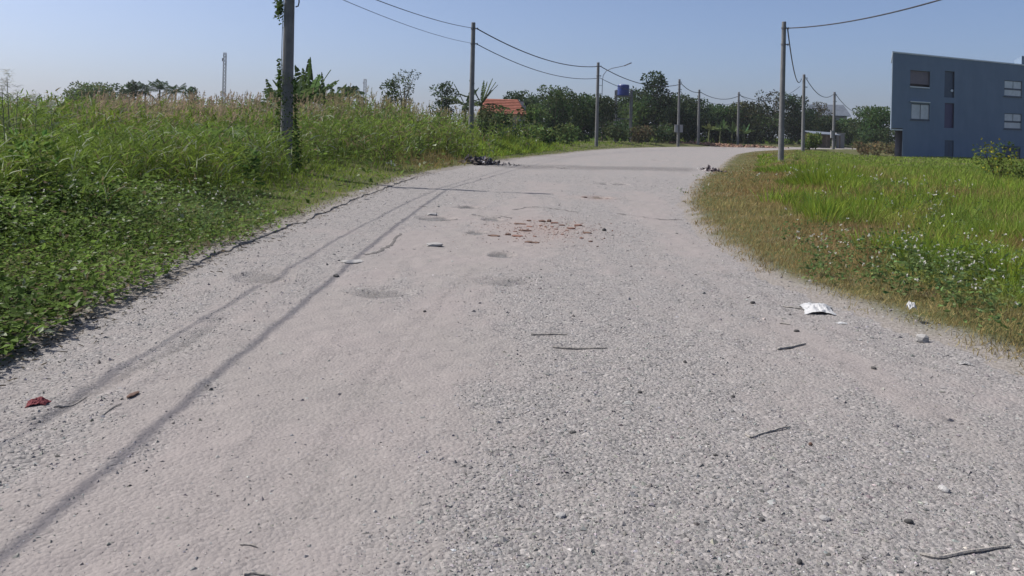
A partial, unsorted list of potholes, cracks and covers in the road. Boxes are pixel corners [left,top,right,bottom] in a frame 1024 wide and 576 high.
crack [364,233,402,255]
